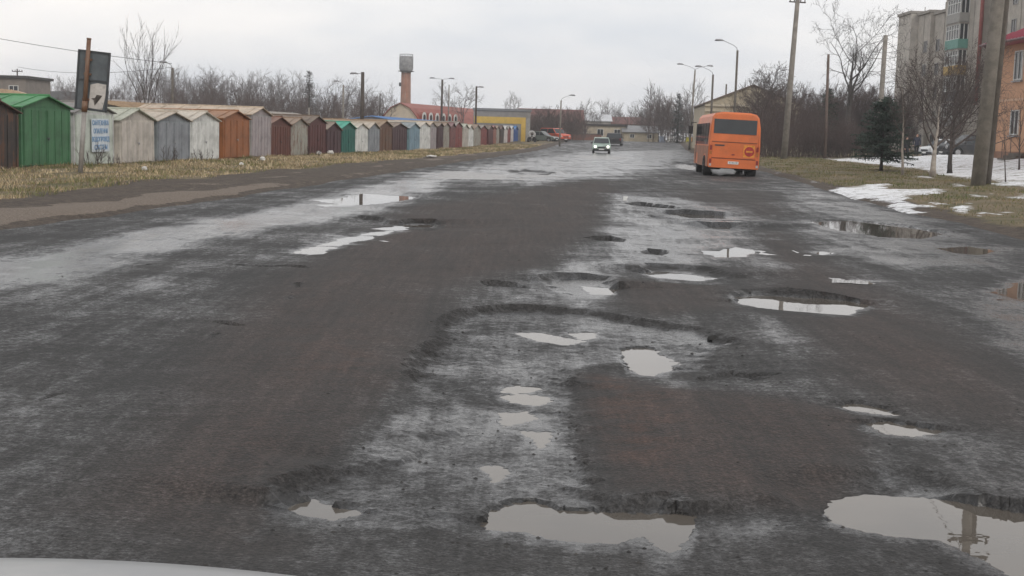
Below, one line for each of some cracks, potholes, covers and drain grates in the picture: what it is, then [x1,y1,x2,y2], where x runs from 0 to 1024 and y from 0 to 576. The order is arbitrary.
pothole [244,304,745,576]
pothole [721,287,877,319]
pothole [808,219,952,241]
pothole [479,279,542,291]
pothole [836,404,903,422]
pothole [536,272,620,300]
pothole [854,419,951,443]
pothole [812,466,1024,576]
